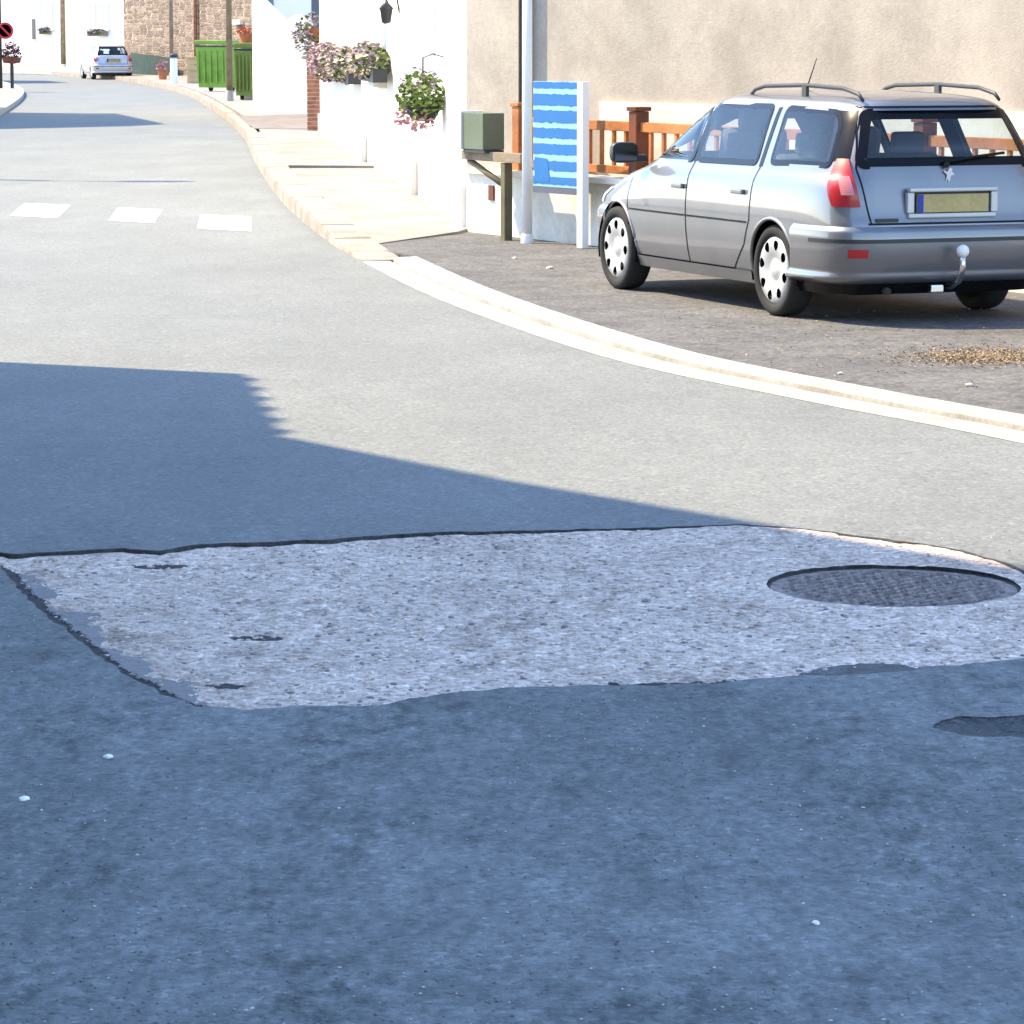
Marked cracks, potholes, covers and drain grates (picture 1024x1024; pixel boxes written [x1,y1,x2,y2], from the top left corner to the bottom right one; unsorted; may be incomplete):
pothole [933,715,1024,738]
manhole cover [767,568,1020,607]
